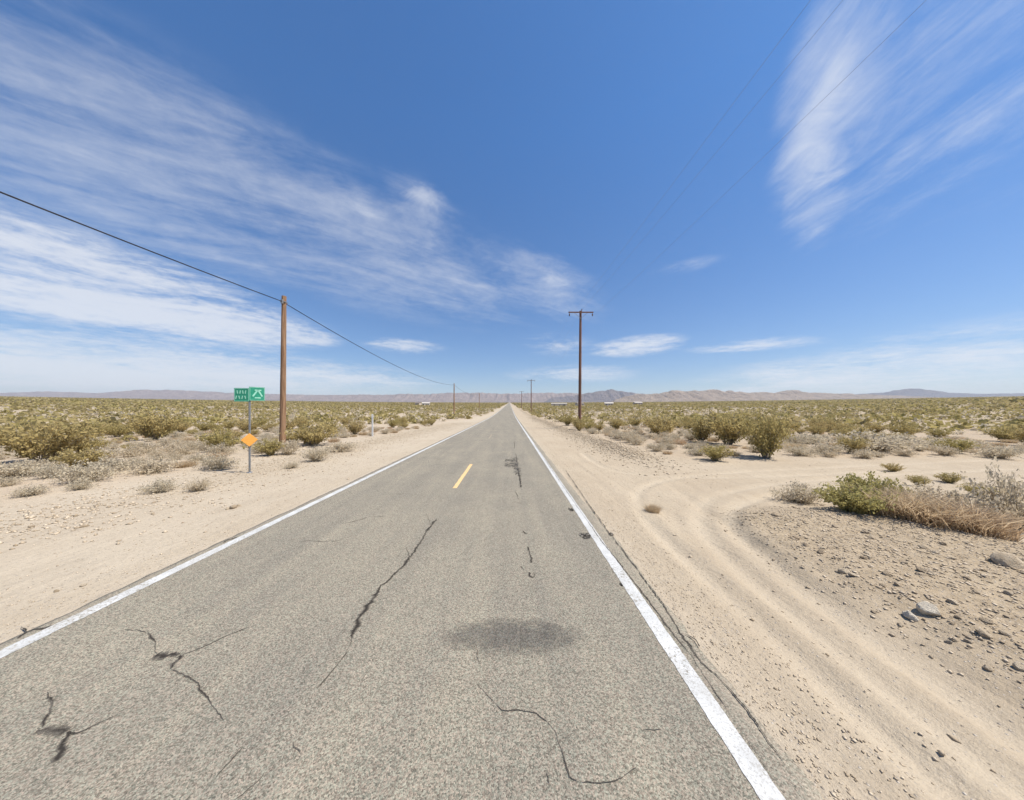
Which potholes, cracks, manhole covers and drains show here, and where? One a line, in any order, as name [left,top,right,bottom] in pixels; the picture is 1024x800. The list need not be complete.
crack [33,692,135,762]
crack [483,690,636,783]
crack [17,625,52,638]
crack [125,627,248,720]
crack [309,514,437,686]
